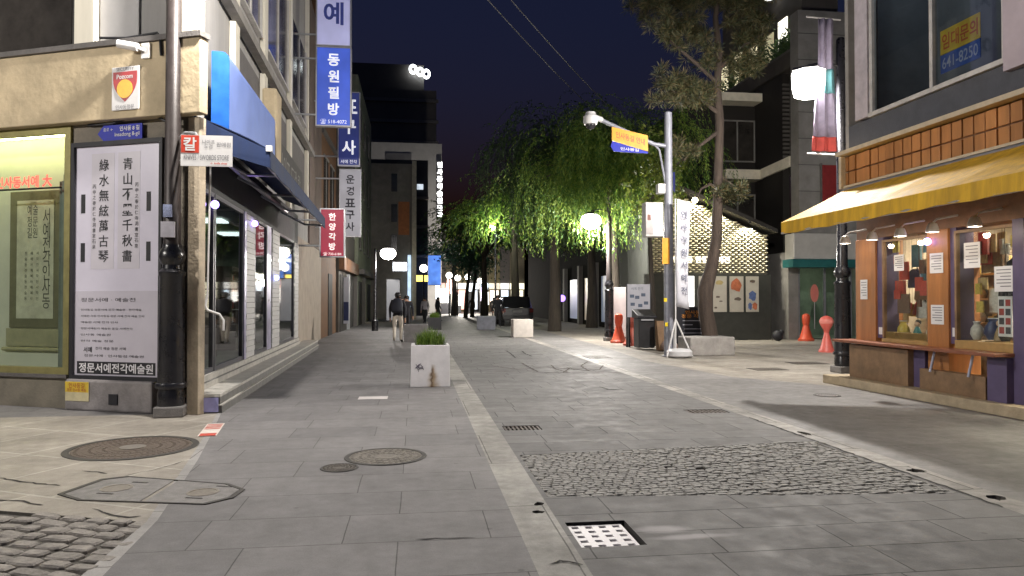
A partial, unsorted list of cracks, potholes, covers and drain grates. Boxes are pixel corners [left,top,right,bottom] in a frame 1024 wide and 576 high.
manhole cover [344,448,427,466]
drain grate [565,520,647,548]
manhole cover [320,463,359,472]
crack [494,351,617,390]
crack [0,478,57,505]
manhole cover [61,436,200,461]
manhole cover [57,476,245,505]
